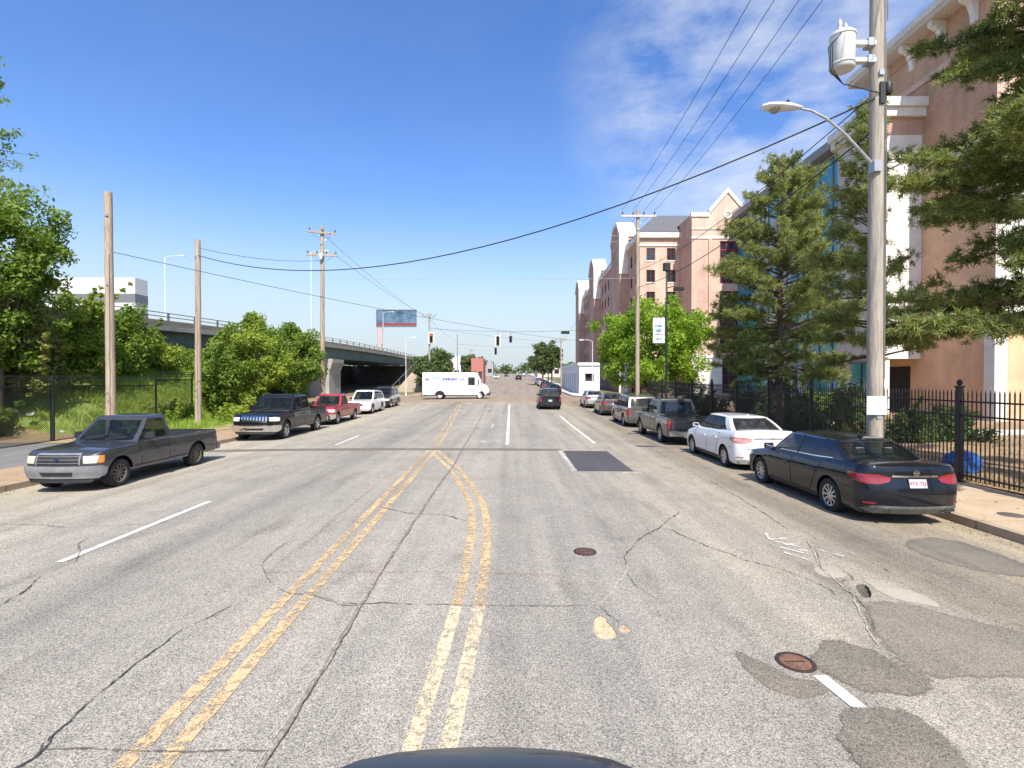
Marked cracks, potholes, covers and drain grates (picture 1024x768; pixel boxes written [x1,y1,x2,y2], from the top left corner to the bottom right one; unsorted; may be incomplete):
crack [596,511,897,645]
manhole cover [775,652,817,673]
crack [14,607,265,768]
pothole [855,584,871,598]
manhole cover [573,548,596,556]
